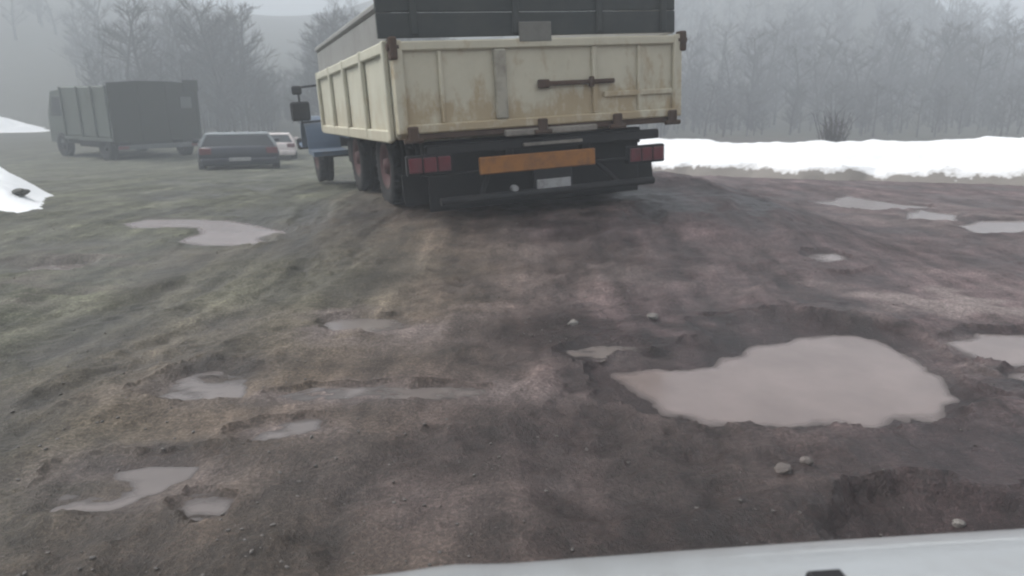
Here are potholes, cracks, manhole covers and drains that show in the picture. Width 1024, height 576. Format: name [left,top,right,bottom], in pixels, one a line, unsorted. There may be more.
pothole [807,193,942,210]
pothole [928,323,1024,368]
pothole [582,304,1009,430]
pothole [315,310,433,334]
pothole [260,376,500,405]
pothole [221,410,335,442]
pothole [0,438,232,517]
pothole [551,334,651,367]
pothole [948,215,1024,234]
pothole [121,352,281,402]
pothole [103,215,298,249]
pothole [163,484,240,522]
